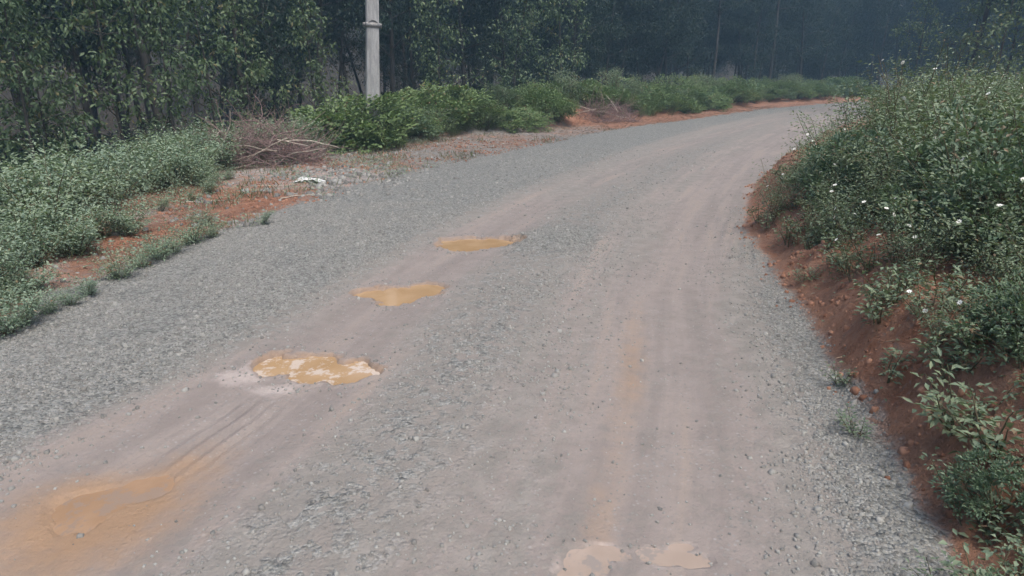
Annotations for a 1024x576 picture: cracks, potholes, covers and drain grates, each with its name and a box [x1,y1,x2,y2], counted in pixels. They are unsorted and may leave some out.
pothole [245,348,388,388]
pothole [28,472,180,538]
pothole [631,542,718,570]
pothole [549,539,632,576]
pothole [432,234,527,252]
pothole [347,279,454,307]
